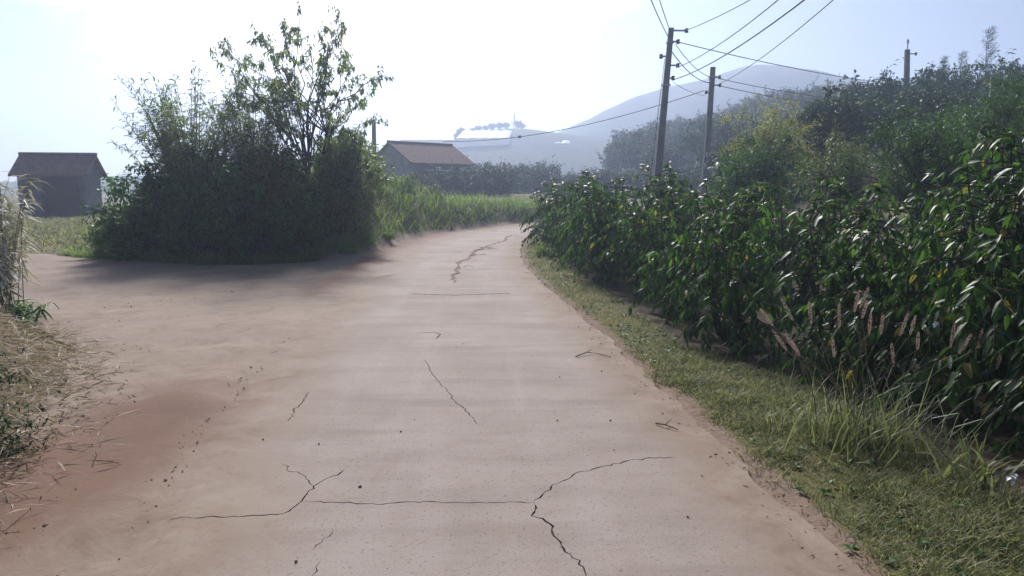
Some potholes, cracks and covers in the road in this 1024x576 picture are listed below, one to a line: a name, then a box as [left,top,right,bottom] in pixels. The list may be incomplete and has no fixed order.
crack [171,457,679,576]
crack [425,361,477,424]
crack [425,235,517,295]
